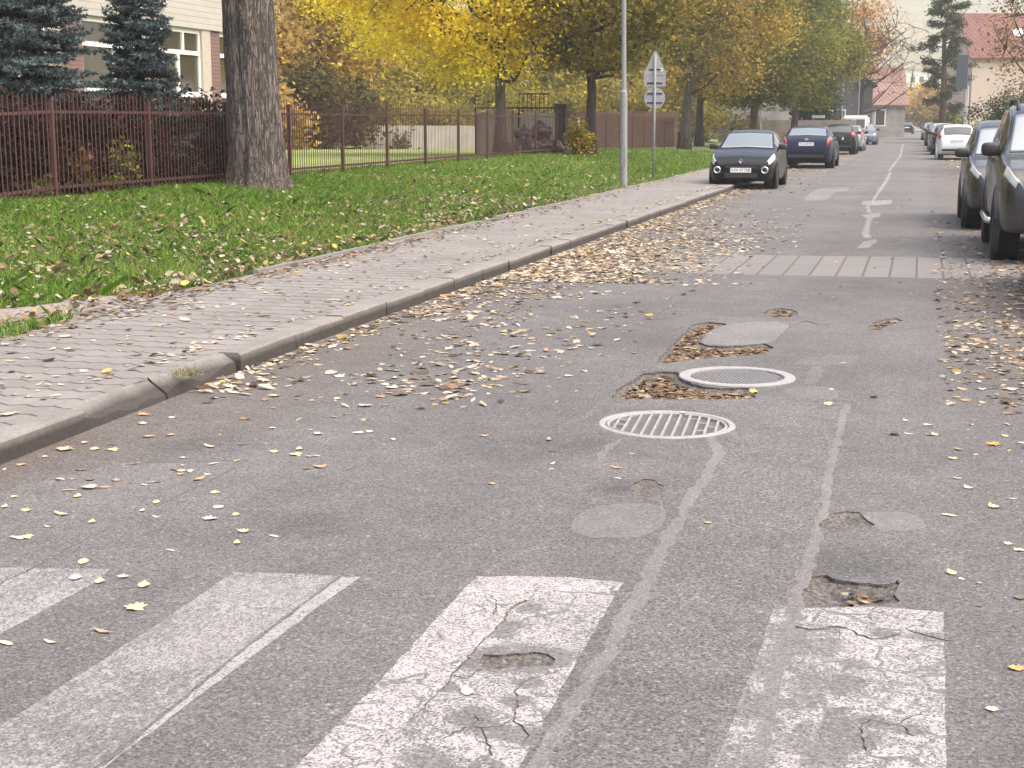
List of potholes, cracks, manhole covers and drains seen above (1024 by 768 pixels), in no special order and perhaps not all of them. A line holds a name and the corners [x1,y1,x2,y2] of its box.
pothole [819,511,874,532]
pothole [868,318,903,330]
crack [795,626,951,641]
pothole [610,371,757,399]
pothole [657,322,774,362]
crack [858,711,926,751]
pothole [480,652,555,670]
manhole cover [679,366,796,388]
pothole [628,479,664,497]
crack [407,594,555,756]
pothole [802,575,900,607]
